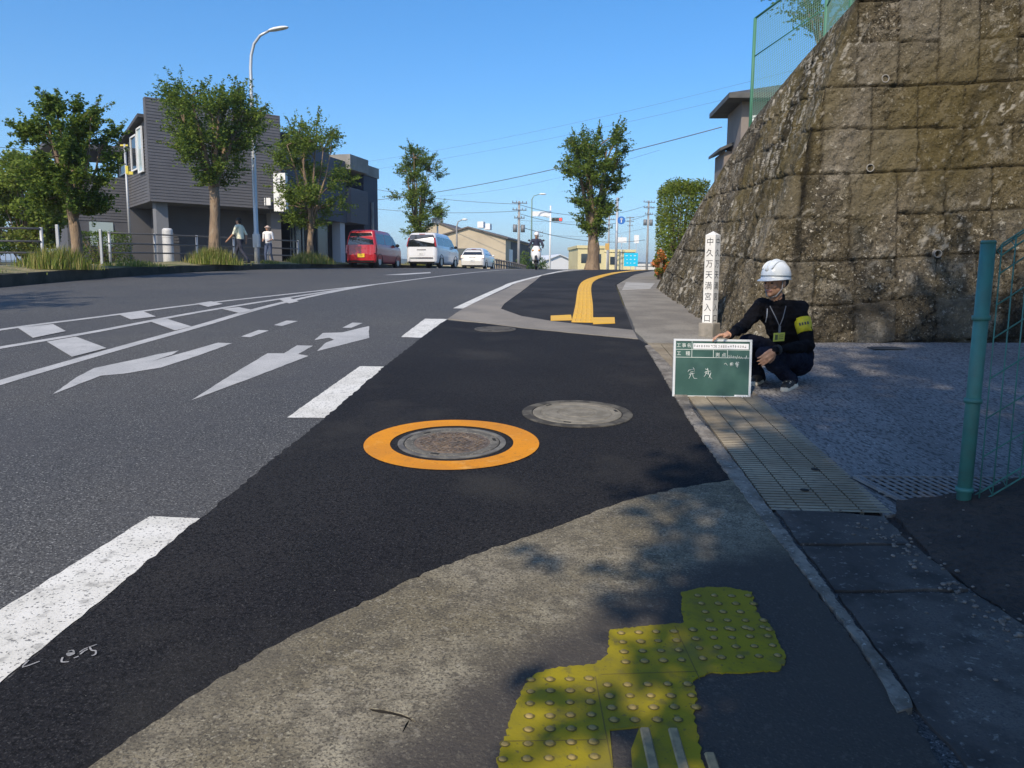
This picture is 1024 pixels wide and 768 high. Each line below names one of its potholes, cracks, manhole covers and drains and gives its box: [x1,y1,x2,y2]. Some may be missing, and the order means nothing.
drain grate [849,475,1022,502]
manhole cover [398,428,506,459]
manhole cover [522,400,633,428]
